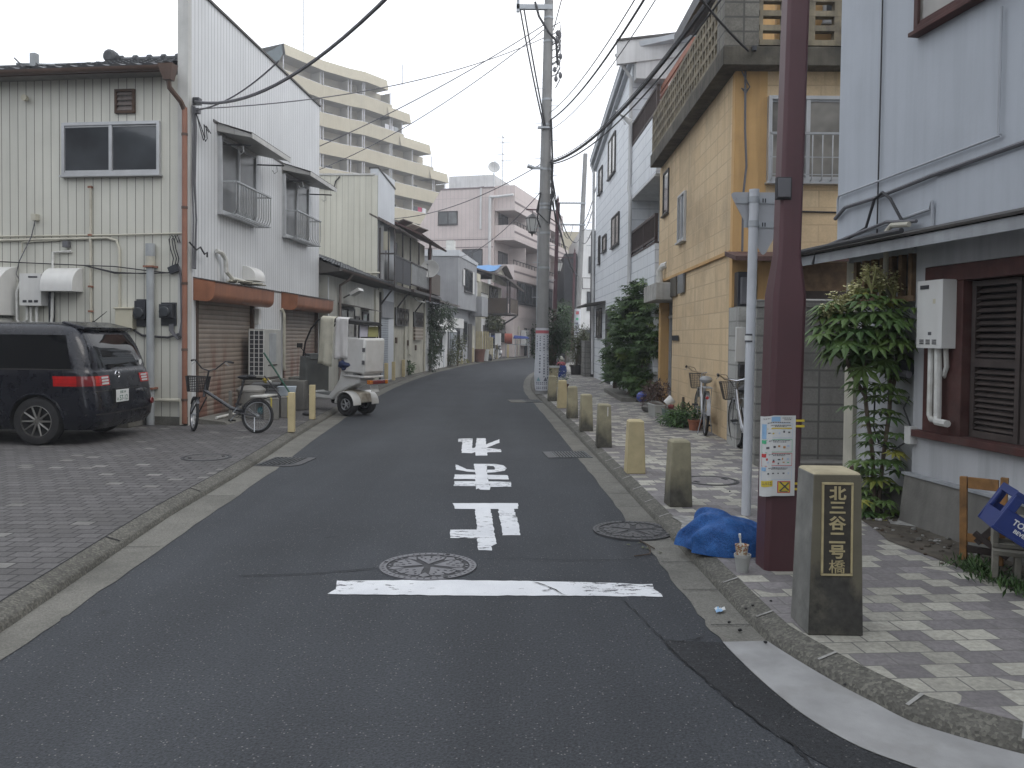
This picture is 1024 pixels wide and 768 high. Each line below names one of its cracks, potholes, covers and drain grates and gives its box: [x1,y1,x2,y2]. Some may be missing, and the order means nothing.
manhole cover [691,476,740,486]
manhole cover [593,521,670,542]
drain grate [254,457,316,467]
manhole cover [379,553,476,581]
